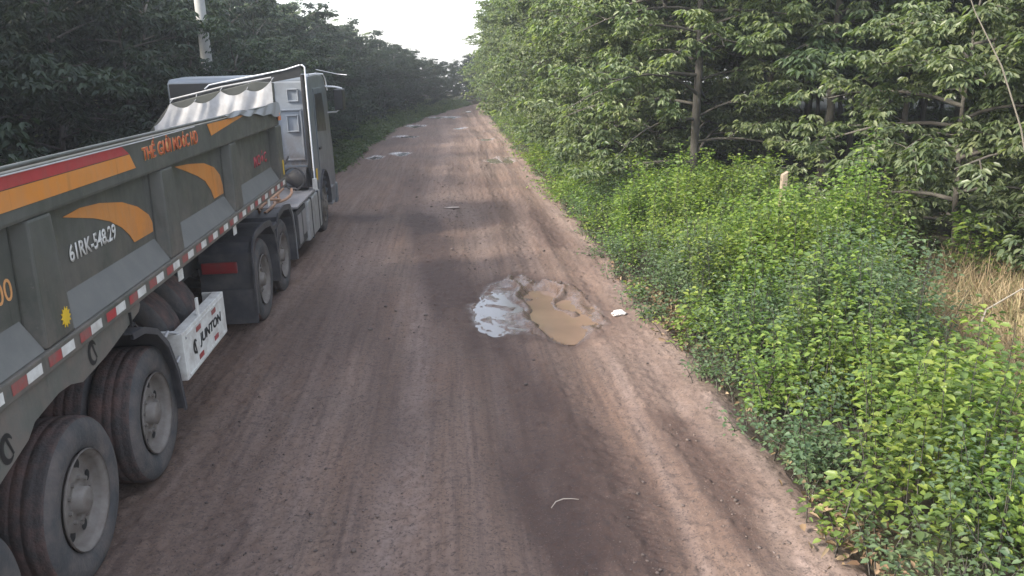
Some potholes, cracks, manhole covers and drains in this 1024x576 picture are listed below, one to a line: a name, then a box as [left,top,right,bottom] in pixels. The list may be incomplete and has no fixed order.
pothole [468,274,607,347]
